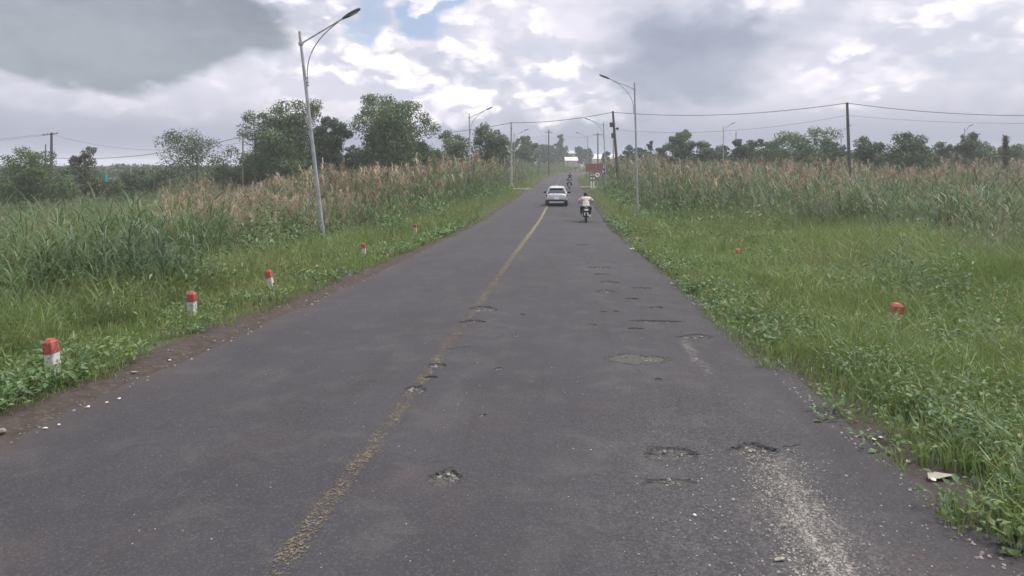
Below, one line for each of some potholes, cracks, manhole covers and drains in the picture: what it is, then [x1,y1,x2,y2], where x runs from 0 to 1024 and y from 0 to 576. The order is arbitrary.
pothole [403,385,427,396]
pothole [643,446,700,462]
pothole [641,478,697,487]
pothole [424,466,464,487]
pothole [724,442,781,456]
